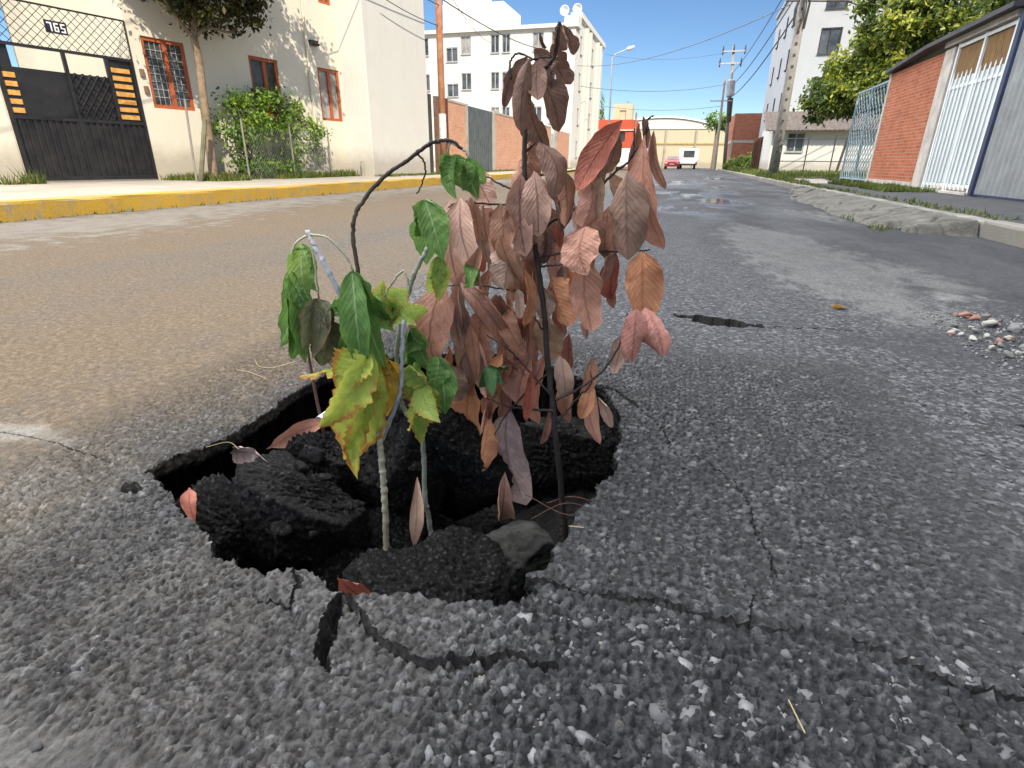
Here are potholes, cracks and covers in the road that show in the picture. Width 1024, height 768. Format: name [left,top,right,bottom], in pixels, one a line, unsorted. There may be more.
pothole [144,353,623,635]
crack [852,637,1024,752]
crack [346,384,805,673]
crack [1,432,116,465]
crack [257,567,304,612]
